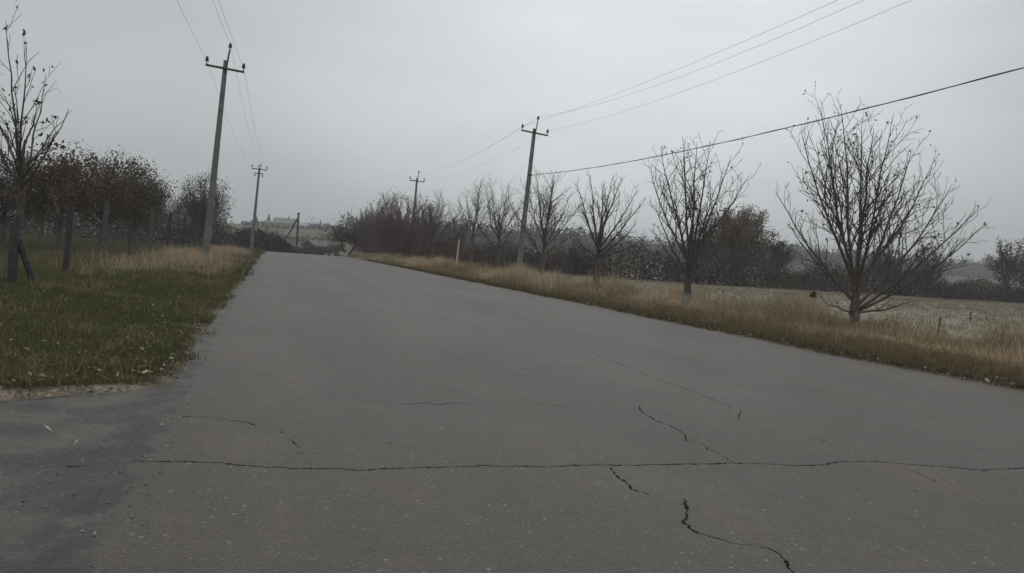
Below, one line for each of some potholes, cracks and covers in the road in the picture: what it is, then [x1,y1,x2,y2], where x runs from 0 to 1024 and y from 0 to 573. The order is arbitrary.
crack [679,499,794,573]
crack [562,342,742,419]
crack [140,405,1024,495]
